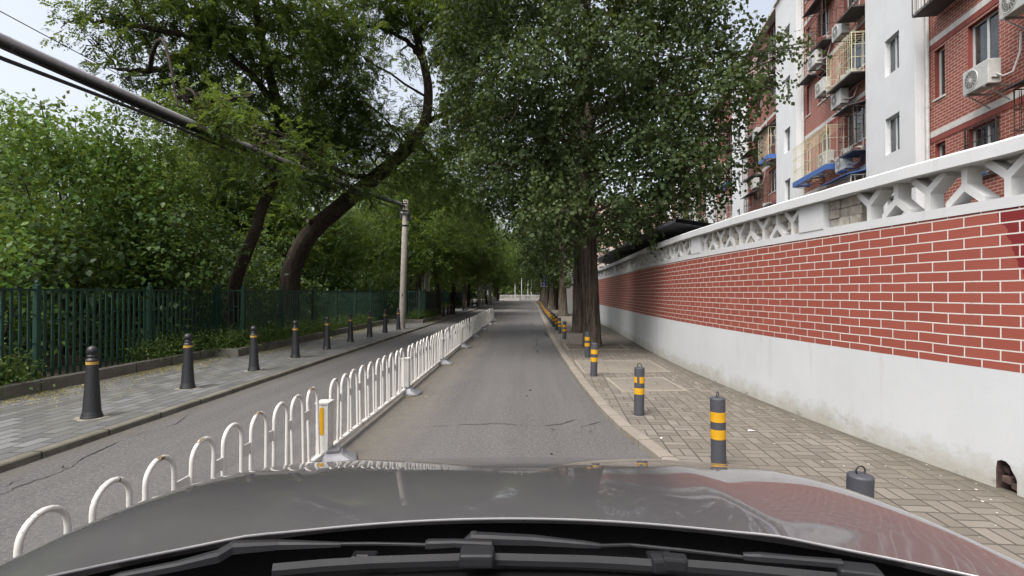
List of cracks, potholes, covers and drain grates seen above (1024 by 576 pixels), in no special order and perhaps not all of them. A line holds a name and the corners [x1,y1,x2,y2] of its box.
crack [398,419,598,433]
crack [2,430,153,494]
manhole cover [605,377,688,393]
